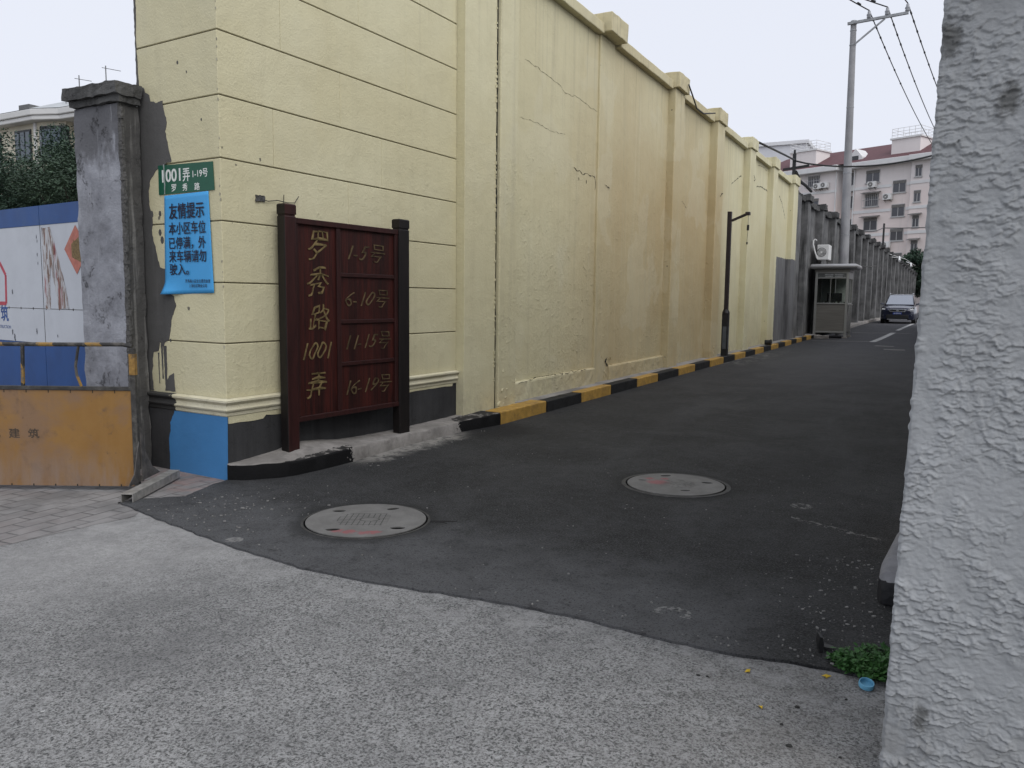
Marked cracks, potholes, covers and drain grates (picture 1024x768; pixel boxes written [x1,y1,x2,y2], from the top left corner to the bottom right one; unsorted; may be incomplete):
manhole cover [300,504,431,540]
manhole cover [621,473,731,498]
